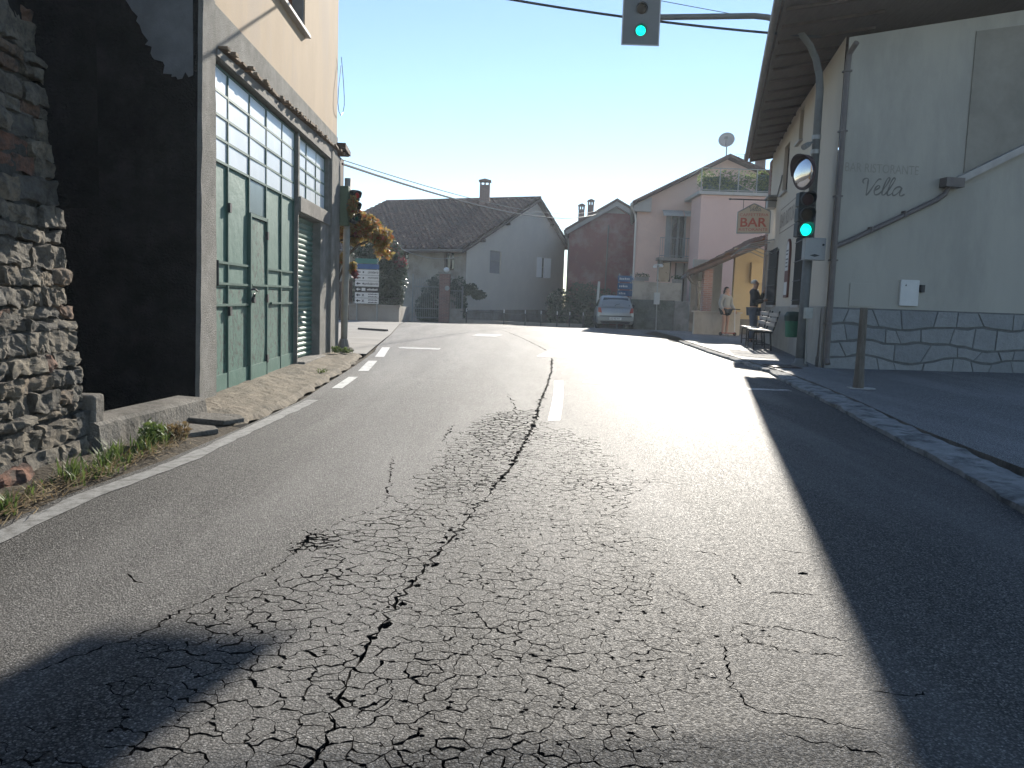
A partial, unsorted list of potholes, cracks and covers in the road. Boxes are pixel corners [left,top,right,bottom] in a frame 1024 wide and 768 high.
crack [0,331,778,768]
